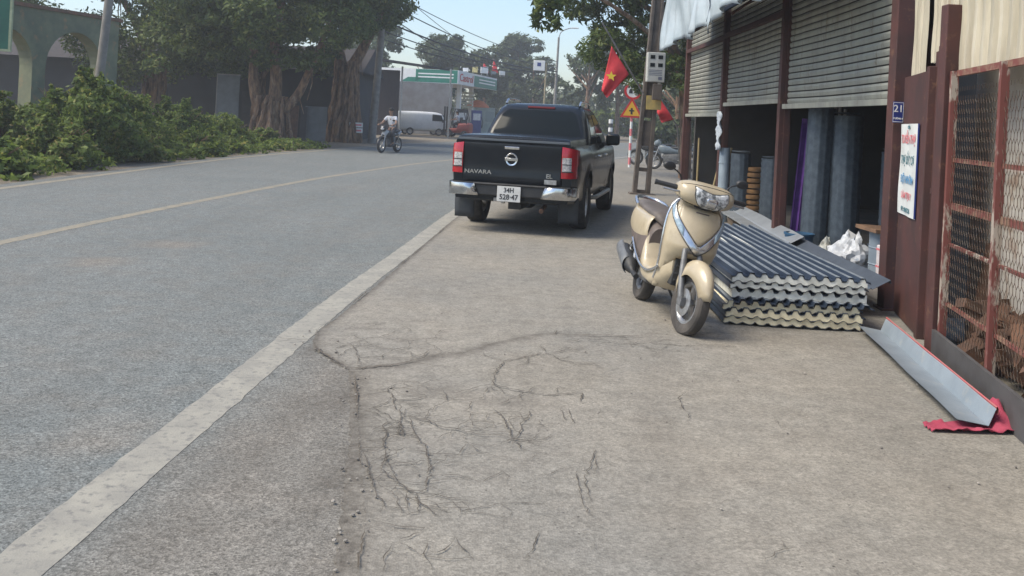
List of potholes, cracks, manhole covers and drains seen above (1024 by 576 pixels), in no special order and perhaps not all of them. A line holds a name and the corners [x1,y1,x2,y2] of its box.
crack [284,228,737,570]
